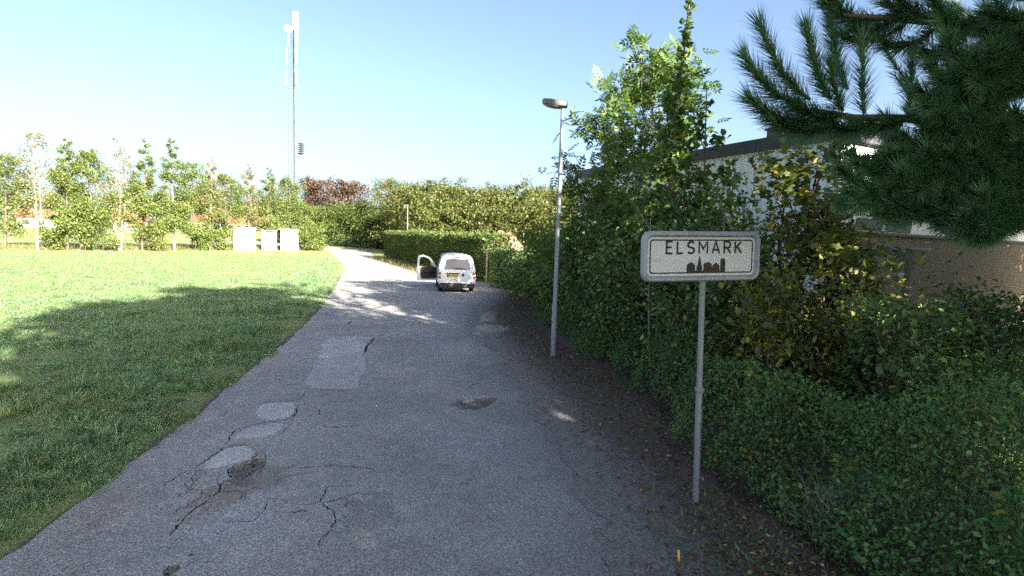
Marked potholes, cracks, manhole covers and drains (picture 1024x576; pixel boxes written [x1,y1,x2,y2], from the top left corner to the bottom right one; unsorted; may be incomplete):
pothole [229,457,265,481]
pothole [460,397,497,410]
crack [163,384,359,557]
